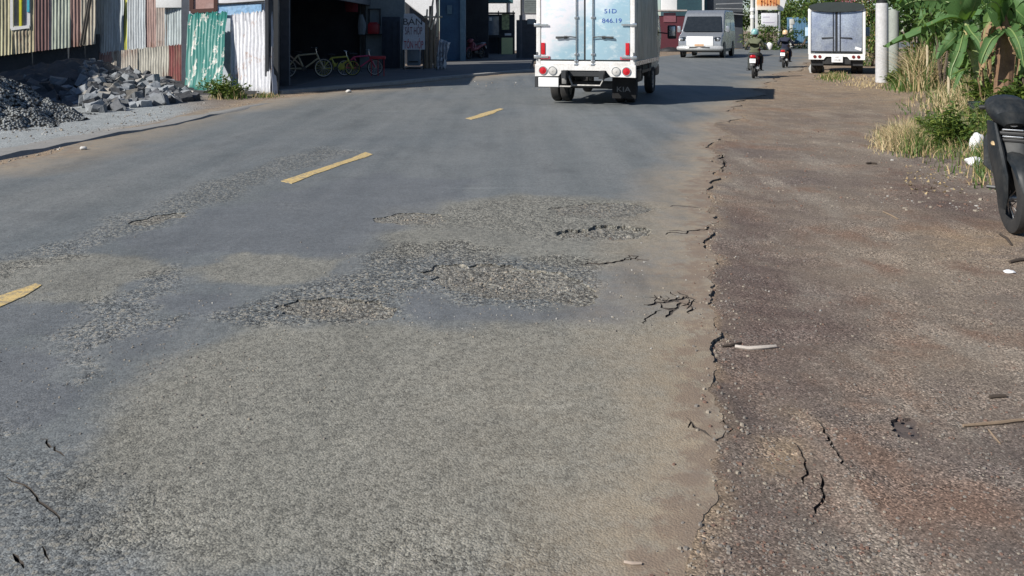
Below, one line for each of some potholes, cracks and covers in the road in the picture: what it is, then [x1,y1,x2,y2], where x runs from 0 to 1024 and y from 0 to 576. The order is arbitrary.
crack [642,292,697,325]
pothole [275,297,398,321]
crack [688,414,734,437]
pothole [420,264,599,307]
crack [13,553,24,569]
crack [7,477,60,523]
pothole [891,417,923,440]
crack [794,419,851,514]
crack [40,438,64,456]
pothole [555,225,652,240]
